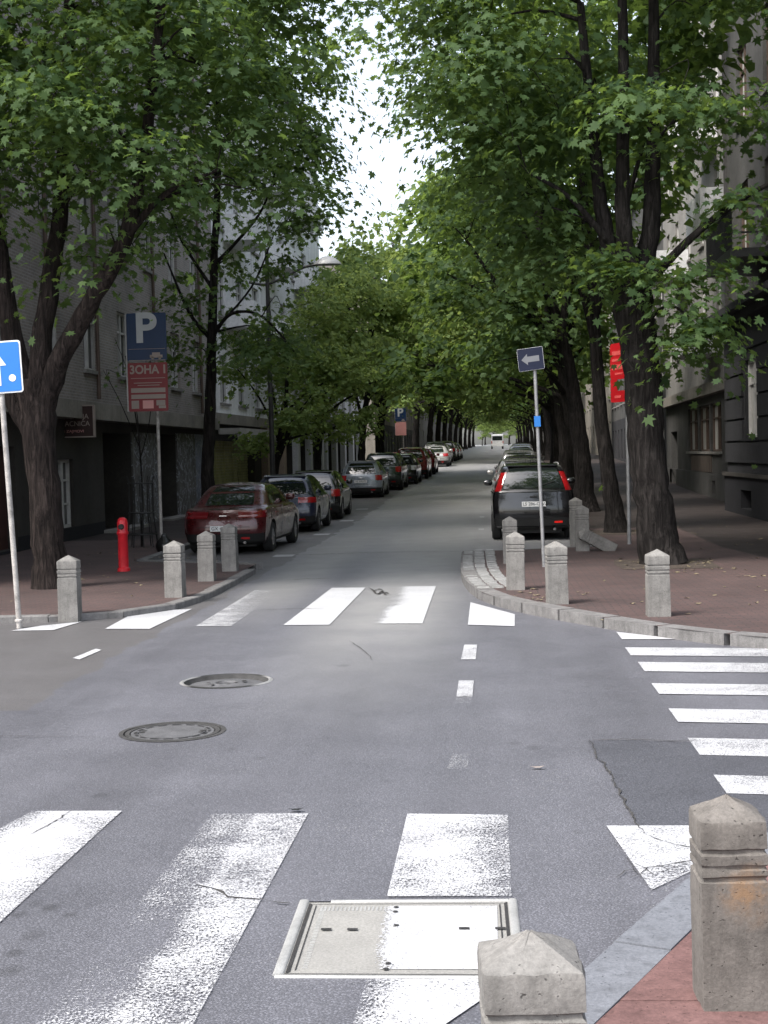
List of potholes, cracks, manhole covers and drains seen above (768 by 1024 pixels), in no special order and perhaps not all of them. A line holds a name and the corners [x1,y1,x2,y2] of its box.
manhole cover [180,673,273,689]
crack [196,884,287,903]
crack [589,739,691,878]
manhole cover [118,721,226,743]
manhole cover [272,898,521,979]
